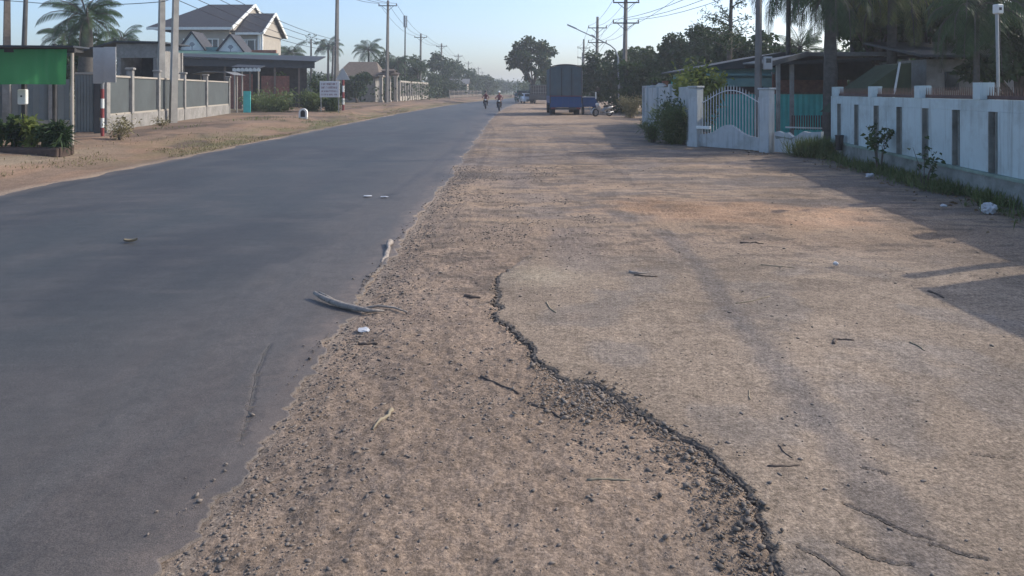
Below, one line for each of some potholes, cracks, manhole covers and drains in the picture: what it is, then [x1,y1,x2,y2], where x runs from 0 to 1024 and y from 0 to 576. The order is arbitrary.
crack [240,345,271,440]
crack [484,269,988,576]
